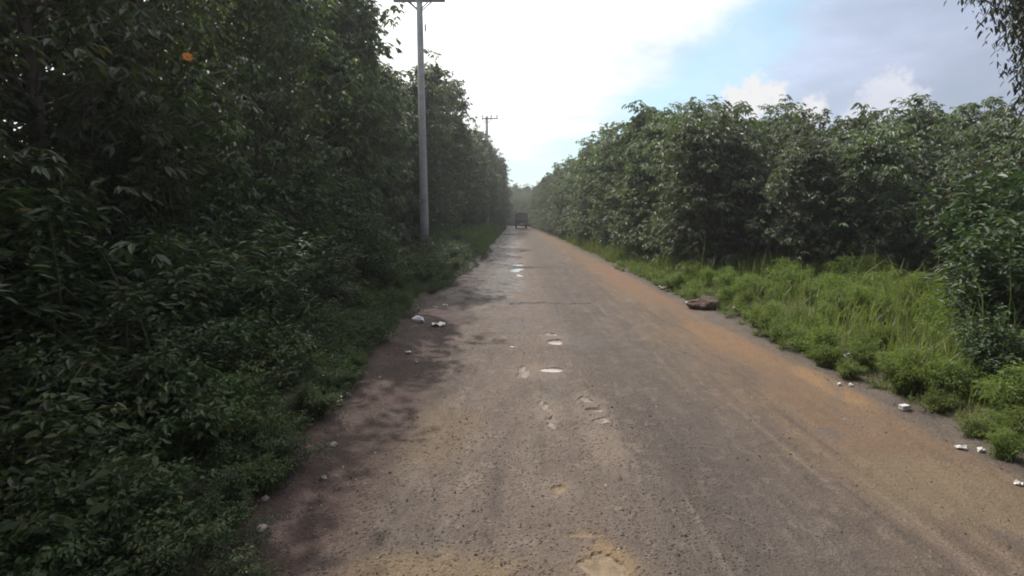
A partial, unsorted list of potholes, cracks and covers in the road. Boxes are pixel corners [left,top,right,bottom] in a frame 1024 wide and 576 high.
pothole [576,551,628,576]
pothole [516,365,530,378]
pothole [550,484,566,495]
pothole [544,415,560,429]
pothole [538,397,553,413]
crack [509,302,591,317]
